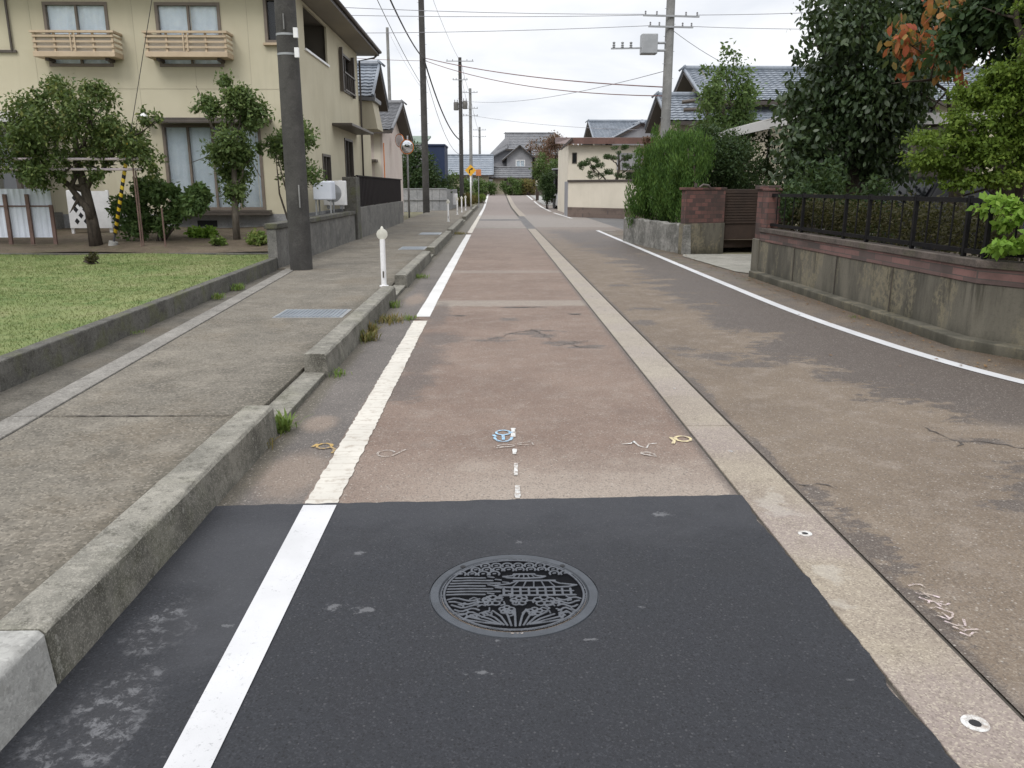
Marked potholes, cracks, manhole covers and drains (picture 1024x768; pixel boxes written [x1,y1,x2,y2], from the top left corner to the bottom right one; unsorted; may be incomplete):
crack [923,426,1022,448]
manhole cover [429,555,599,639]
drain grate [272,309,352,318]
